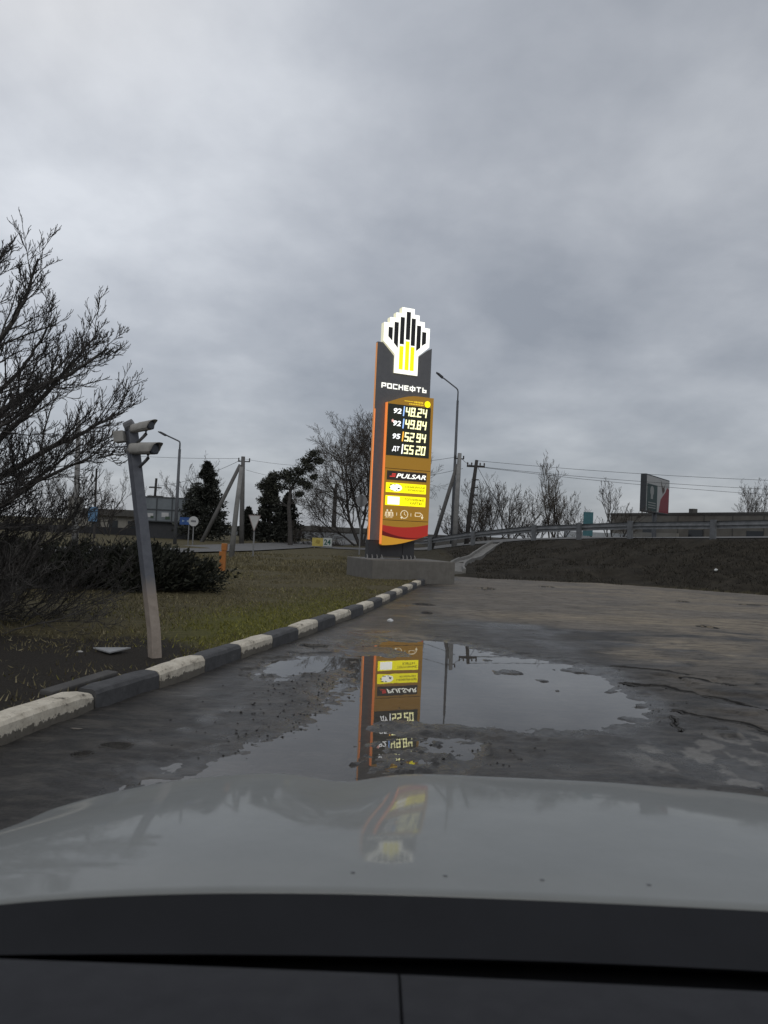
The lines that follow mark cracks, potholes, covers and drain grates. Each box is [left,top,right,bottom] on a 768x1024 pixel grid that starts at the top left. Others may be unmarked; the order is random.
crack [610,665,768,733]
pothole [99,742,134,750]
